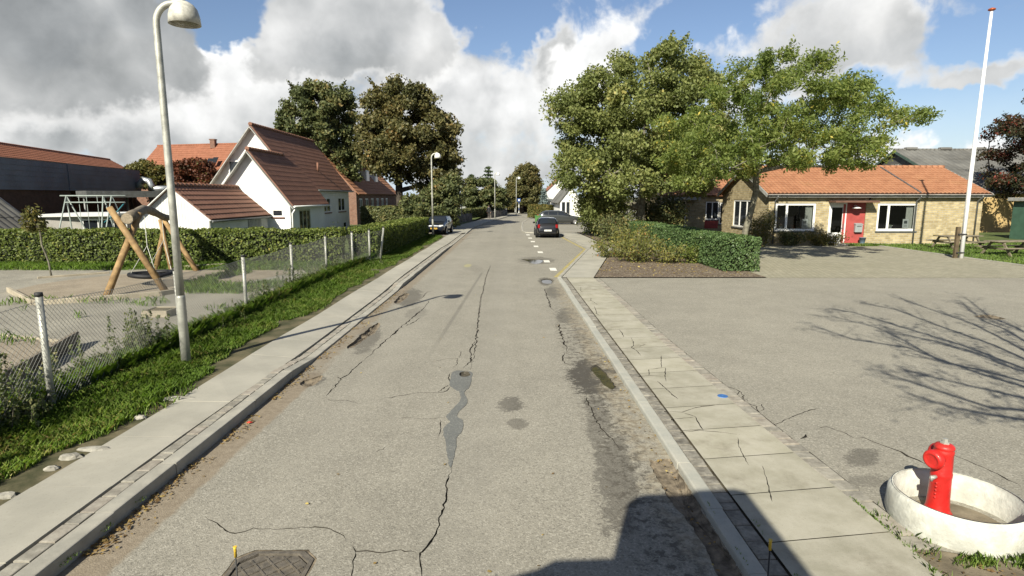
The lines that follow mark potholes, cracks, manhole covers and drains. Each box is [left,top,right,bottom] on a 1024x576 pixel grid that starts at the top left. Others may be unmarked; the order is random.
pothole [347,323,380,349]
manhole cover [222,550,317,576]
crack [205,468,452,576]
crack [326,291,430,403]
pothole [300,375,323,387]
pothole [591,365,616,389]
crack [544,289,577,365]
crack [578,396,619,448]
crack [391,270,489,398]
